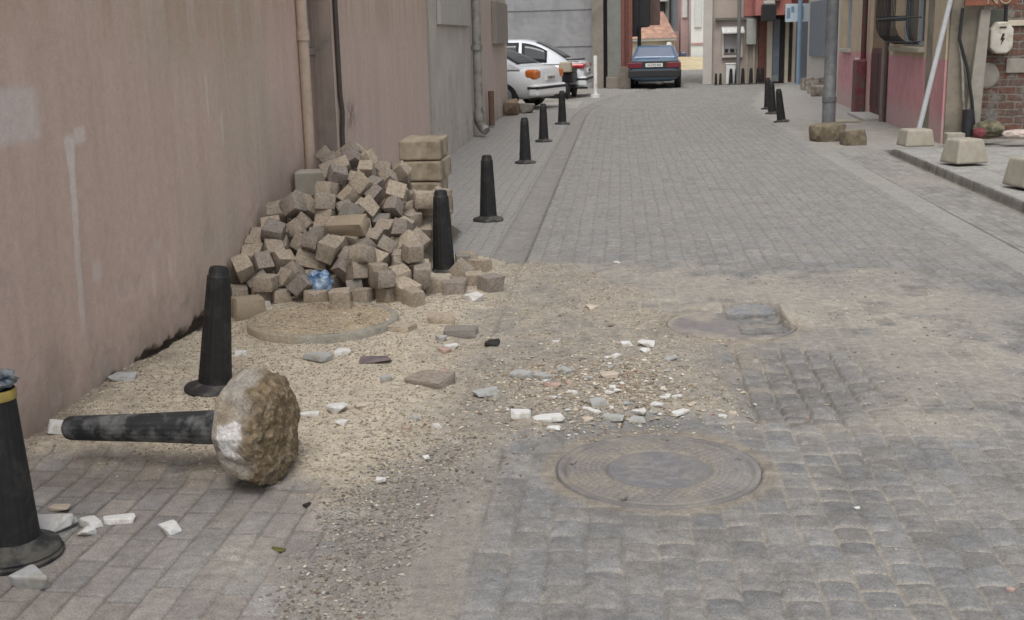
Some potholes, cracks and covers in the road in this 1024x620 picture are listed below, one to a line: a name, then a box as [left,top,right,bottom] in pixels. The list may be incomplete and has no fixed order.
manhole cover [246,302,399,344]
manhole cover [667,311,796,341]
manhole cover [558,435,761,510]
